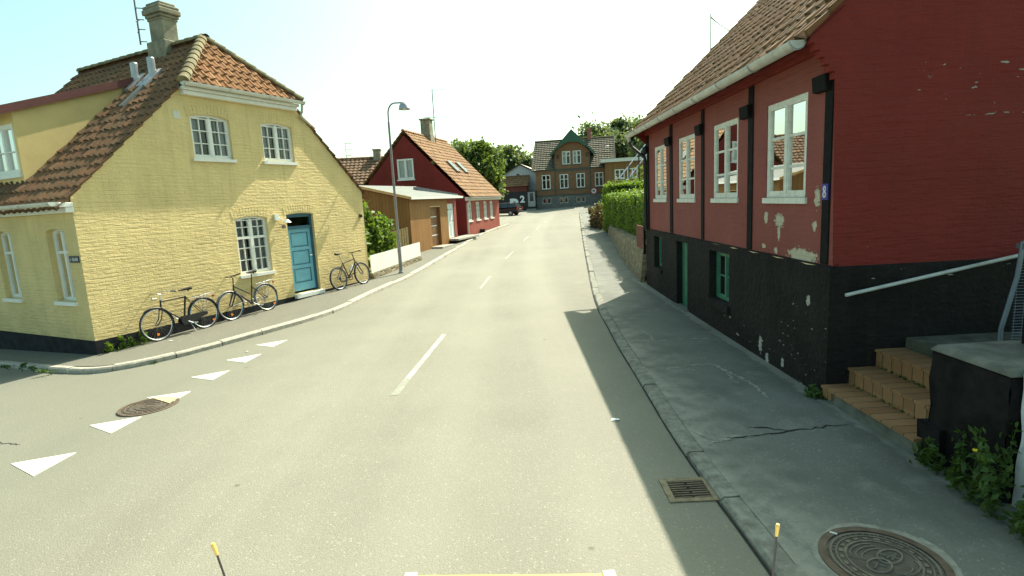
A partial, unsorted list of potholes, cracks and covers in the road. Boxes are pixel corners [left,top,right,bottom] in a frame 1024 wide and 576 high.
manhole cover [117,396,180,417]
crack [724,424,848,439]
drain grate [658,477,720,503]
manhole cover [812,523,963,576]
